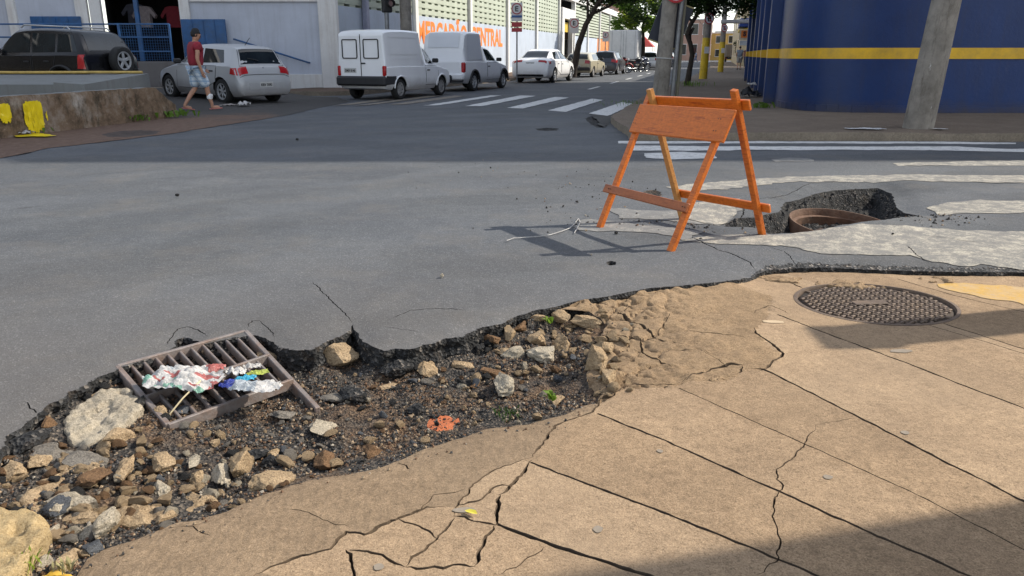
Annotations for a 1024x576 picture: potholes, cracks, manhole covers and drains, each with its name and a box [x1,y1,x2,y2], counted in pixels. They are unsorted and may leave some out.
crack [753,418,852,576]
drain grate [115,330,320,429]
pothole [0,311,607,576]
pothole [725,188,917,234]
crack [613,305,787,385]
manhole cover [793,283,961,326]
crack [254,387,622,576]
